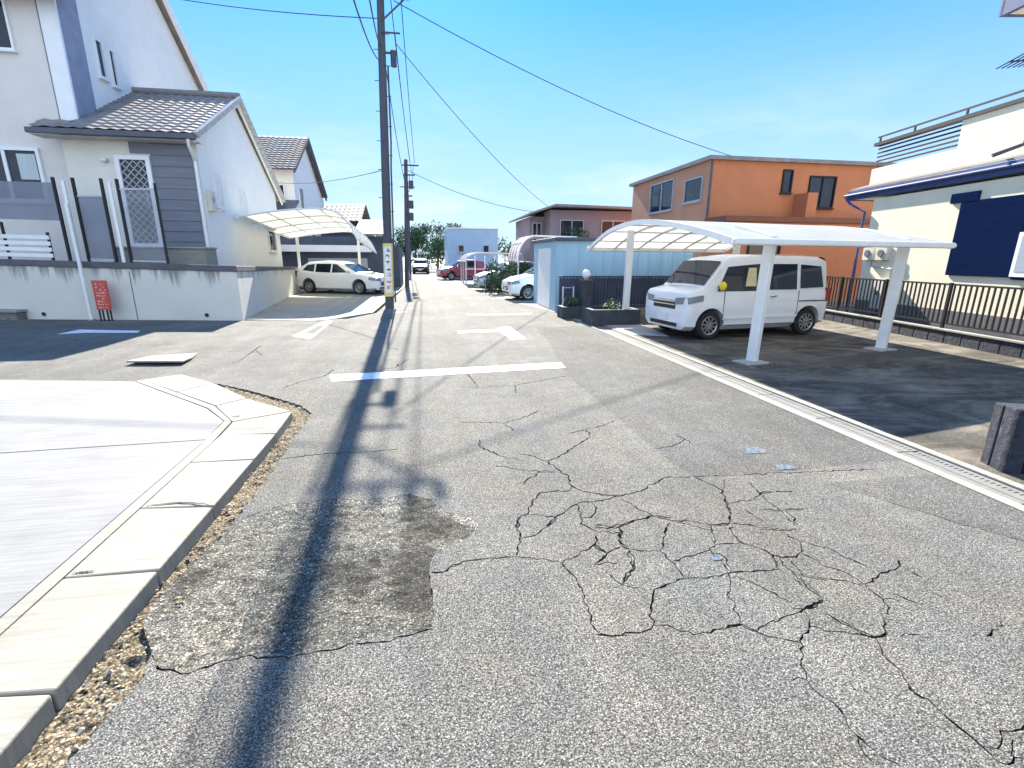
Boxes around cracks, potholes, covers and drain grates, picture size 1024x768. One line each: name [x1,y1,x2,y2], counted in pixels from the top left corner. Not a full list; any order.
crack [430,421,1024,766]
